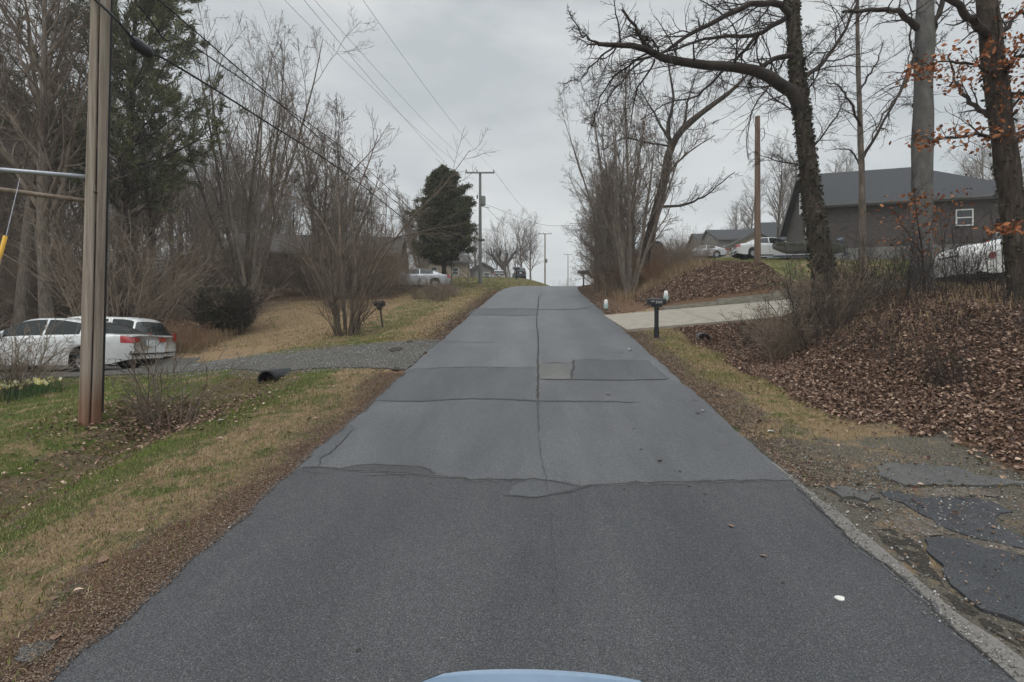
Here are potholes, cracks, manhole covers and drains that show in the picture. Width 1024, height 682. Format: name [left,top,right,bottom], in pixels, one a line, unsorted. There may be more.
crack [306,430,1014,679]
